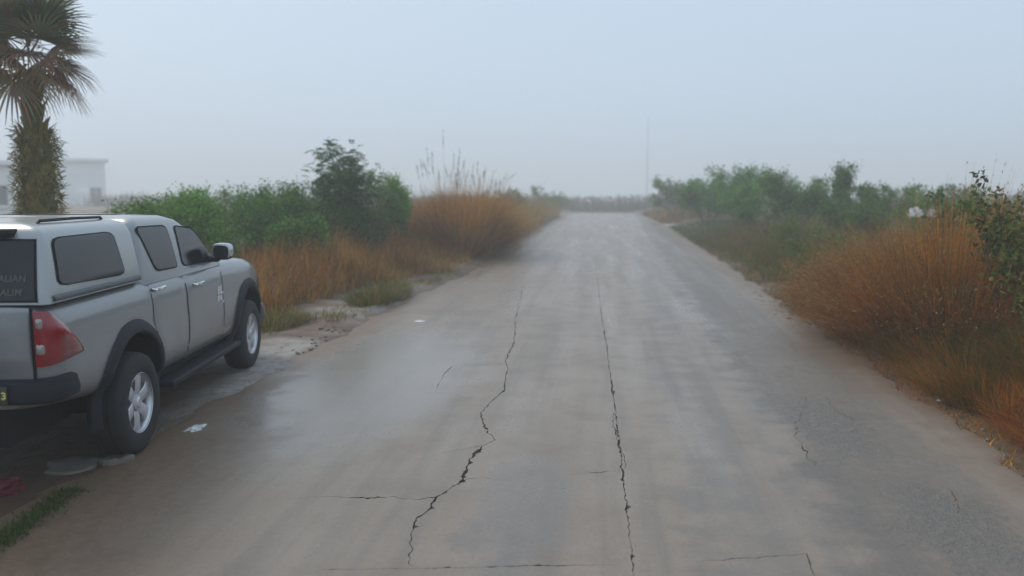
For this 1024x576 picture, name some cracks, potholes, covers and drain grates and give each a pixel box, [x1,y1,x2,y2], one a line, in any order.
crack [331,288,590,570]
crack [595,260,635,576]
